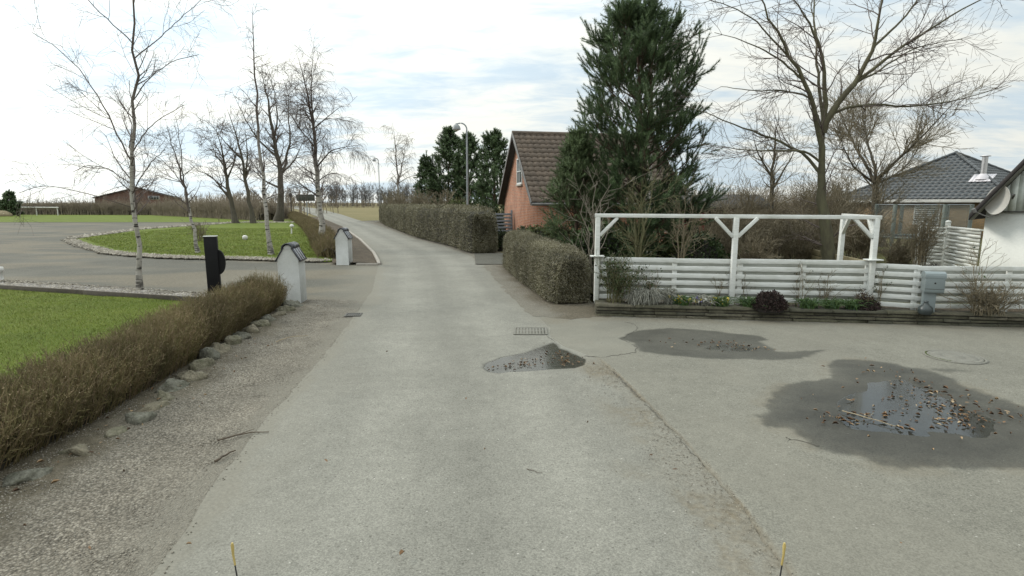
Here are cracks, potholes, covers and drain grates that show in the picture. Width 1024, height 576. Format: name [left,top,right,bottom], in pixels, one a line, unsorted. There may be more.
manhole cover [923,349,989,364]
drain grate [513,327,548,335]
